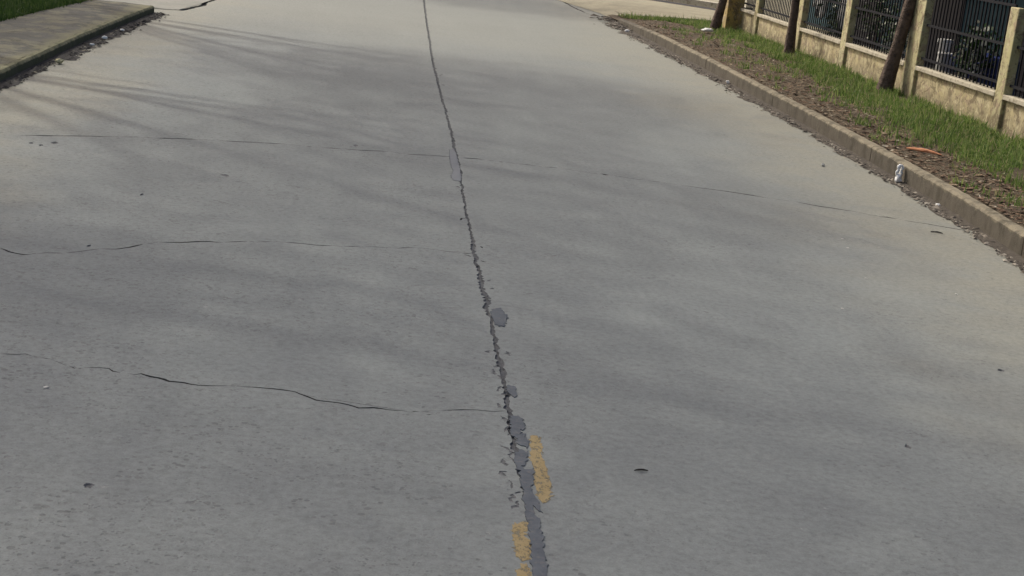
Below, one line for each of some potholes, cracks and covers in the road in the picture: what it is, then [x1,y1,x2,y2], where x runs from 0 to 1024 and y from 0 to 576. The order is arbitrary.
crack [169,0,215,11]
crack [1,241,469,255]
crack [12,354,508,415]
crack [423,0,528,527]
